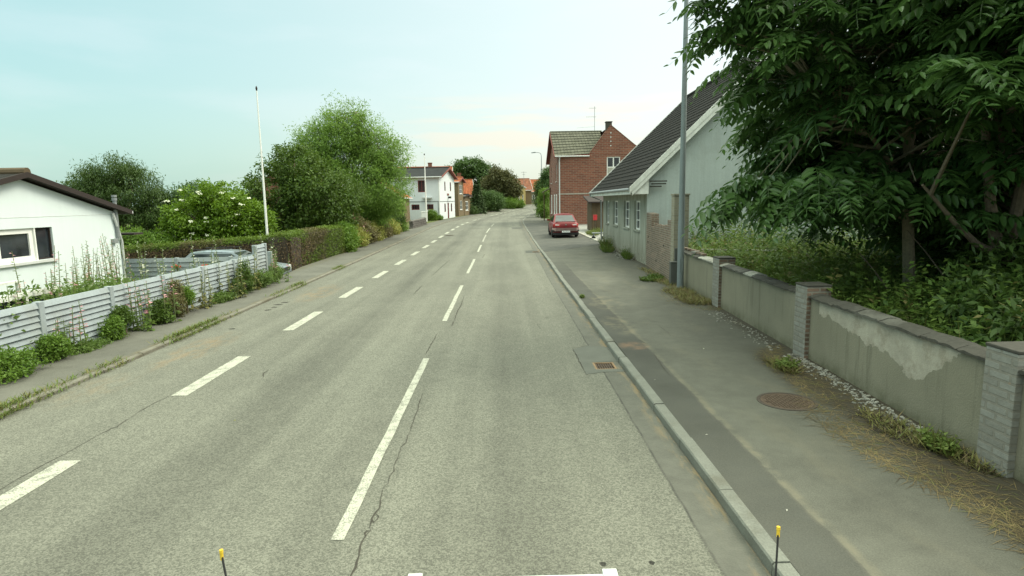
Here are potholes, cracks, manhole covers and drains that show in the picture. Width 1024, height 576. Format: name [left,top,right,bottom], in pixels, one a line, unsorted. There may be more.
crack [0,397,167,490]
crack [350,394,423,576]
manhole cover [757,392,818,411]
